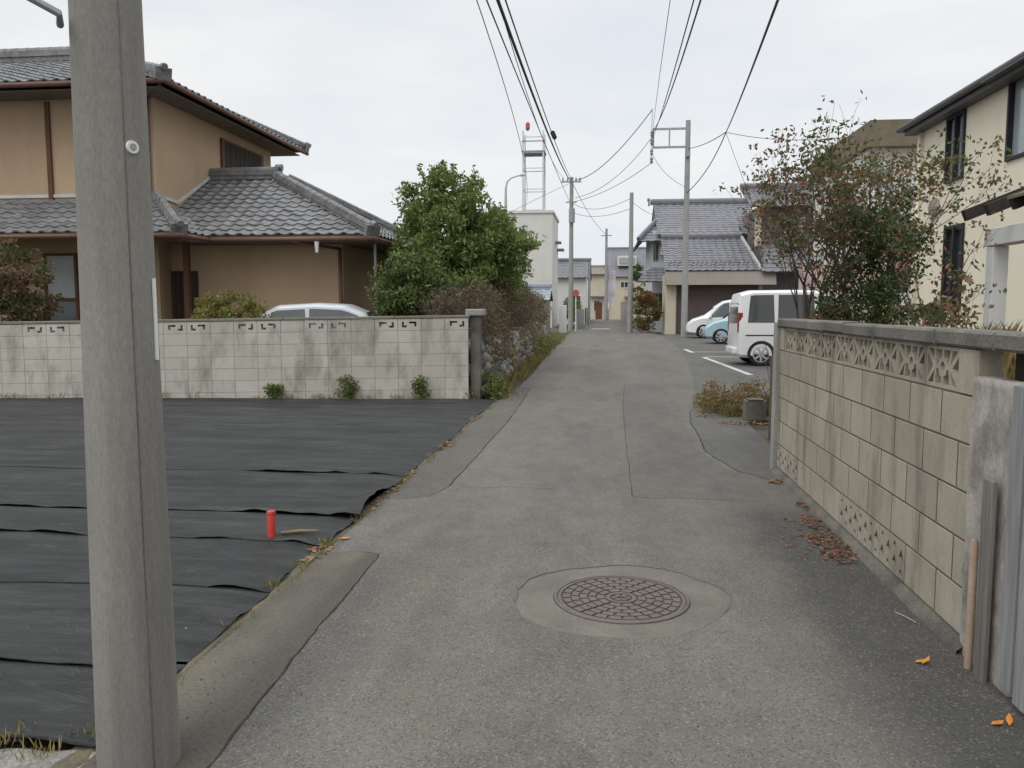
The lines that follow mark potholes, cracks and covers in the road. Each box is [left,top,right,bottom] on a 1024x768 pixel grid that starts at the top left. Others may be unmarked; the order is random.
manhole cover [515,565,733,639]
